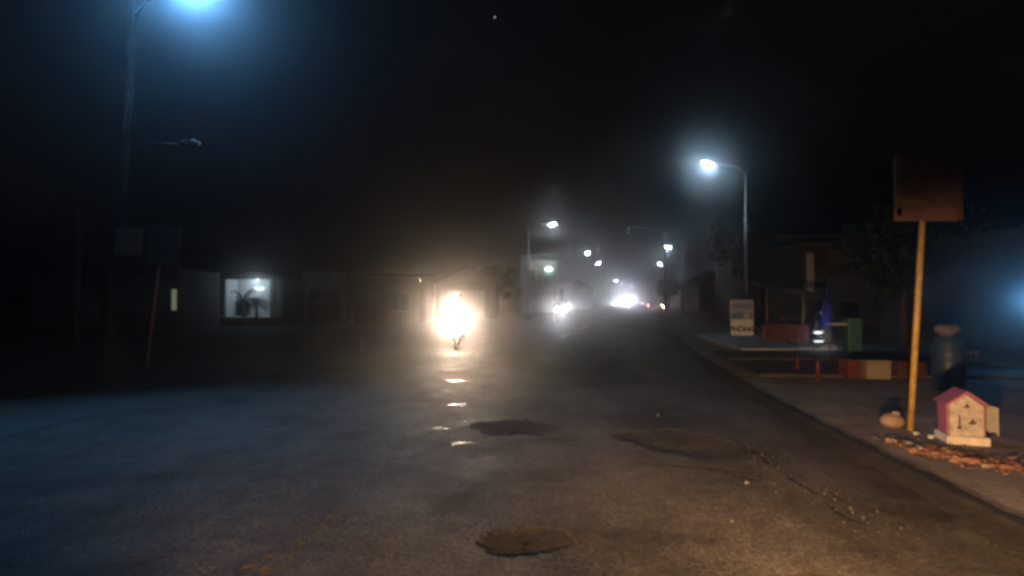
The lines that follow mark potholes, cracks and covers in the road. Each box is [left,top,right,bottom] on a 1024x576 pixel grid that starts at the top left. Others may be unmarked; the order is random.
pothole [464,418,563,437]
